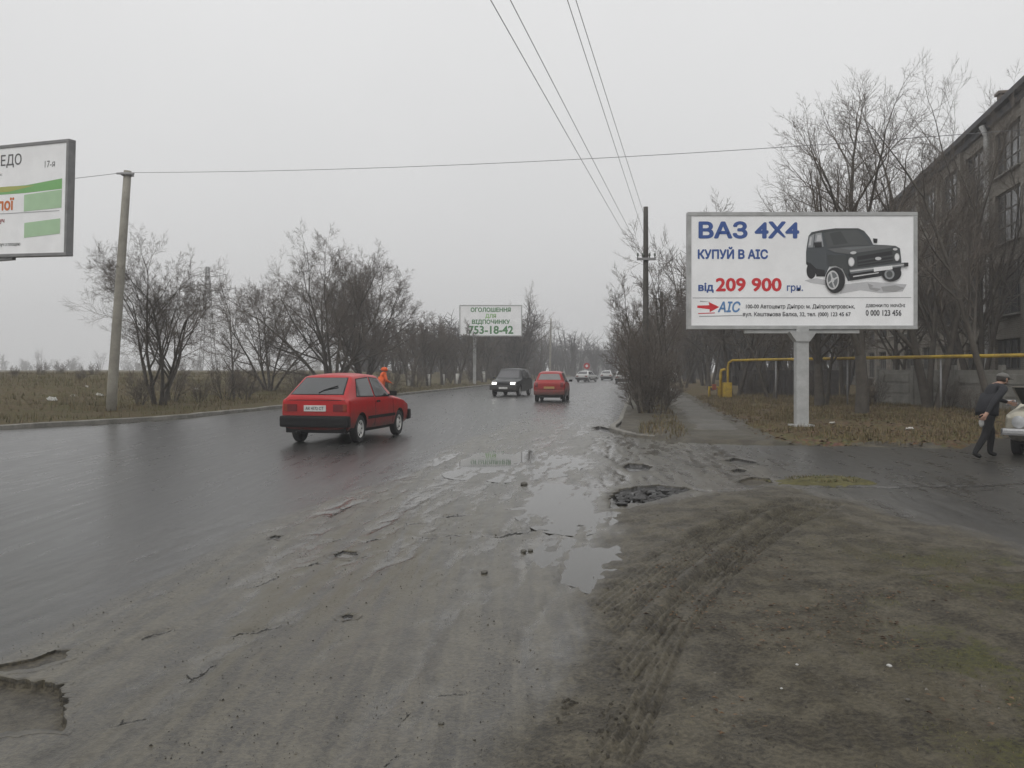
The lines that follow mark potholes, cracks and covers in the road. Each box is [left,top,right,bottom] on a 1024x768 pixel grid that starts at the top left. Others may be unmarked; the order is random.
pothole [0,674,82,738]
pothole [613,462,662,473]
pothole [0,647,80,674]
pothole [325,549,367,561]
pothole [601,484,698,510]
pothole [729,476,782,487]
pothole [333,611,363,622]
